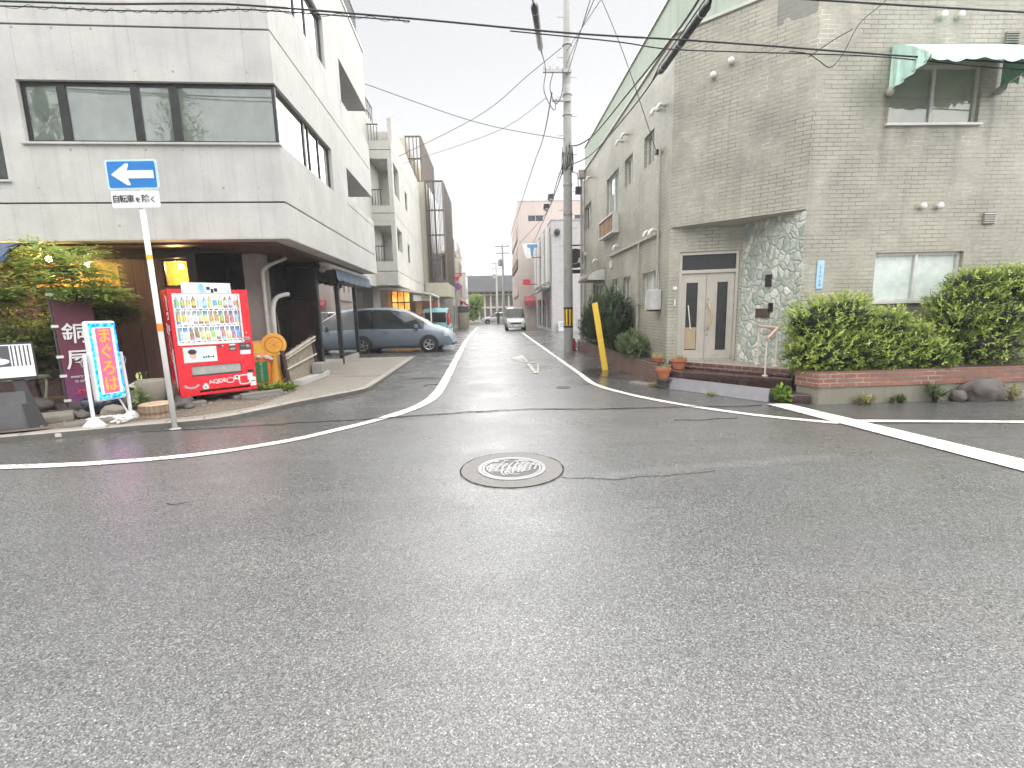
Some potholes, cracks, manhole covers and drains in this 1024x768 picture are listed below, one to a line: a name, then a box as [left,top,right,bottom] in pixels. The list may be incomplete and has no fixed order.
crack [564,470,715,480]
manhole cover [460,453,564,488]
